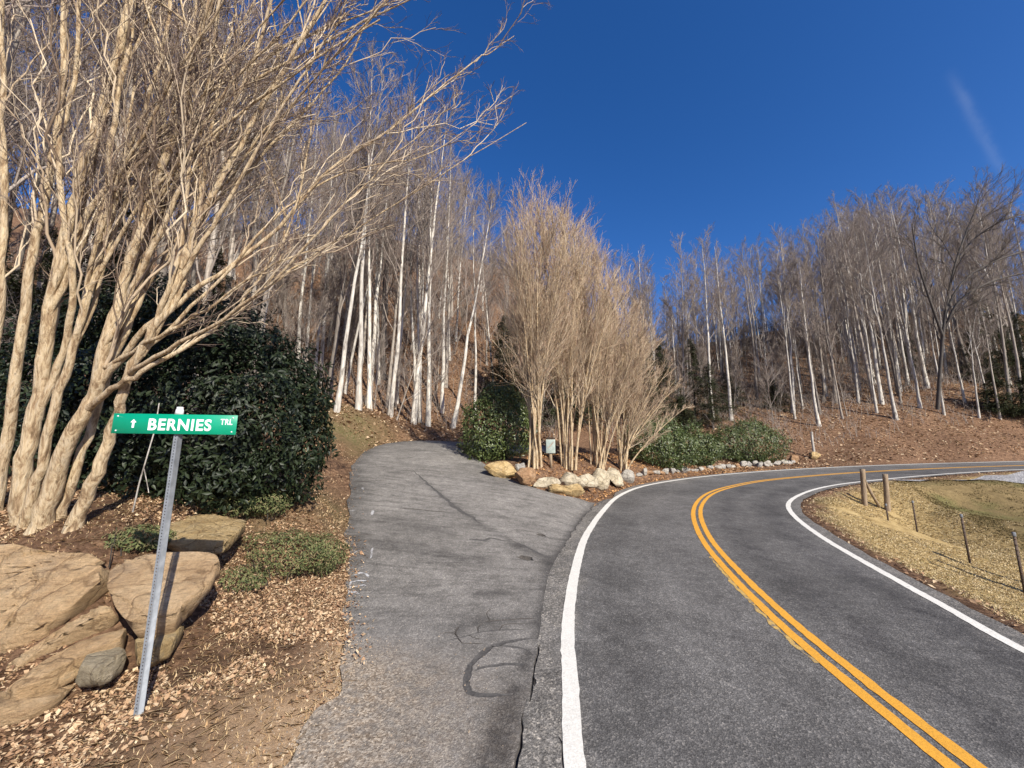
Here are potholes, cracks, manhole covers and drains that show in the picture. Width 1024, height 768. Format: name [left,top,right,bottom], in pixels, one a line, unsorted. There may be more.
crack [434,609,540,768]
